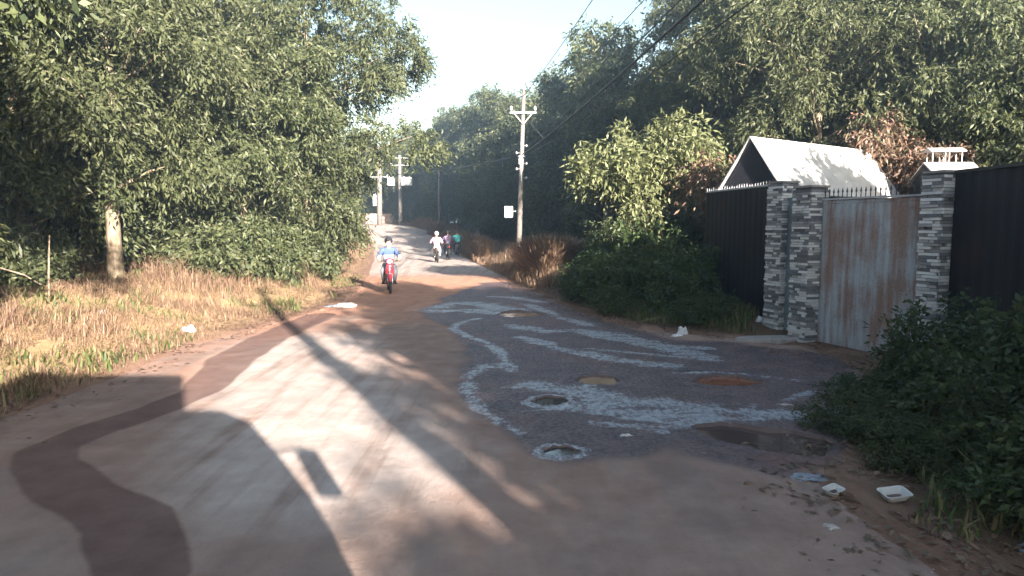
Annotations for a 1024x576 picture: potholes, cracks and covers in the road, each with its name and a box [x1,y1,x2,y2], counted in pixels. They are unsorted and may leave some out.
pothole [568,374,629,388]
pothole [531,443,592,461]
pothole [521,394,578,409]
pothole [681,420,851,465]
pothole [684,372,773,389]
pothole [493,309,553,319]
